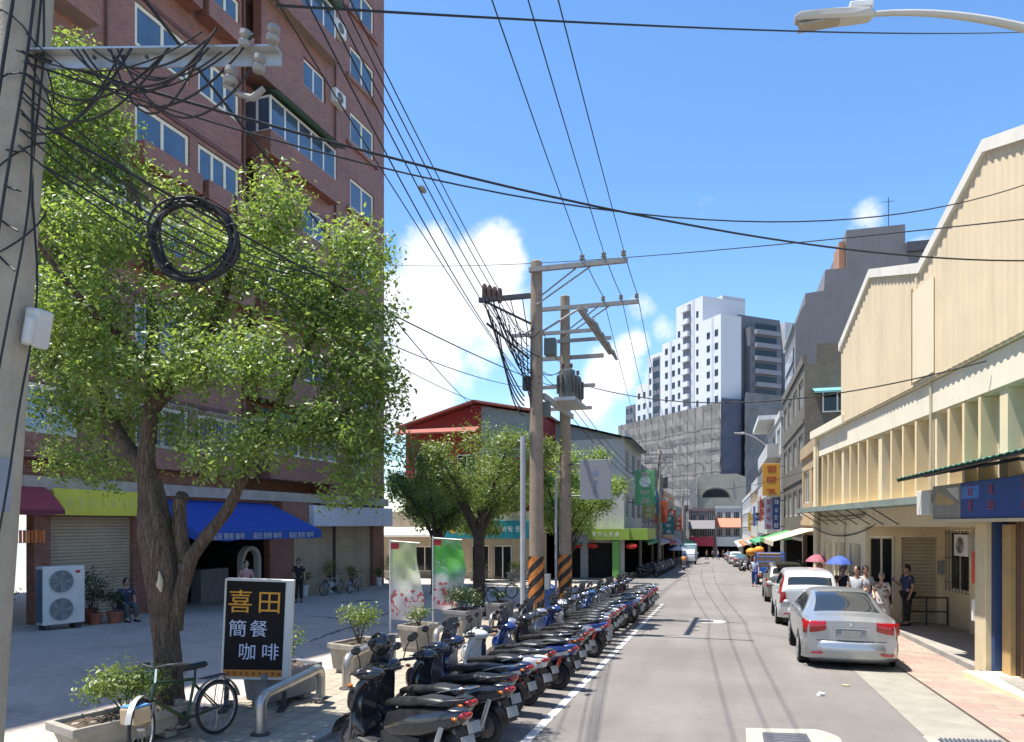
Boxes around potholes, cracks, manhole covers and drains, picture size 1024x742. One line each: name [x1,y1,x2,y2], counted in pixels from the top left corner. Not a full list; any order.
crack [309,600,388,642]
